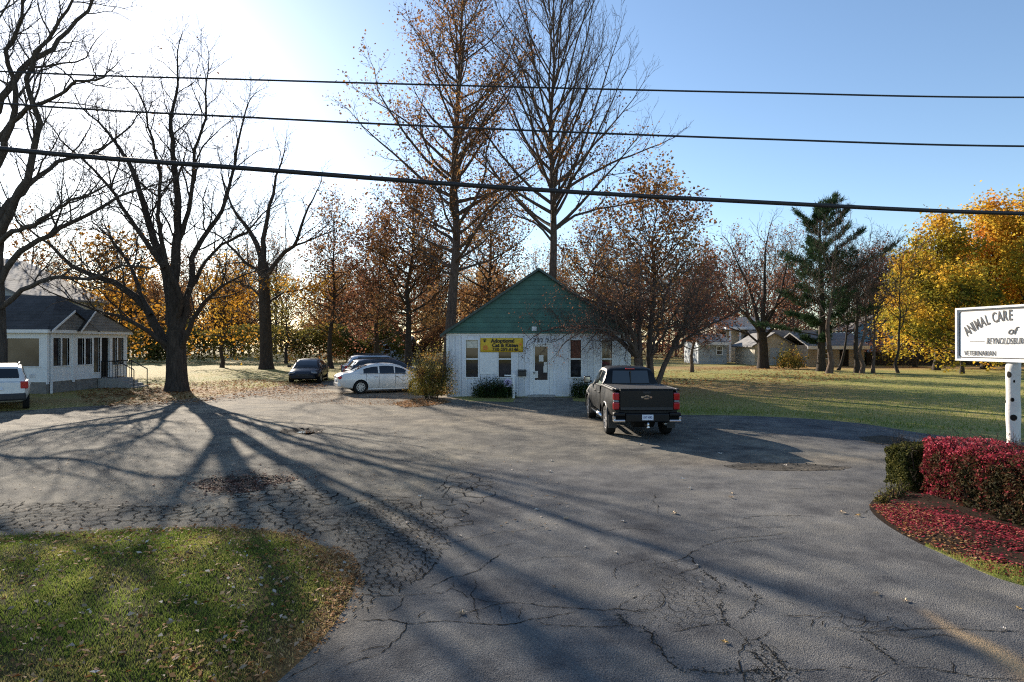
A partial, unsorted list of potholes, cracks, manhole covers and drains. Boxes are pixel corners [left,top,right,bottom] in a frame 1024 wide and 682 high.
pothole [279,427,324,435]
crack [0,472,1022,682]
